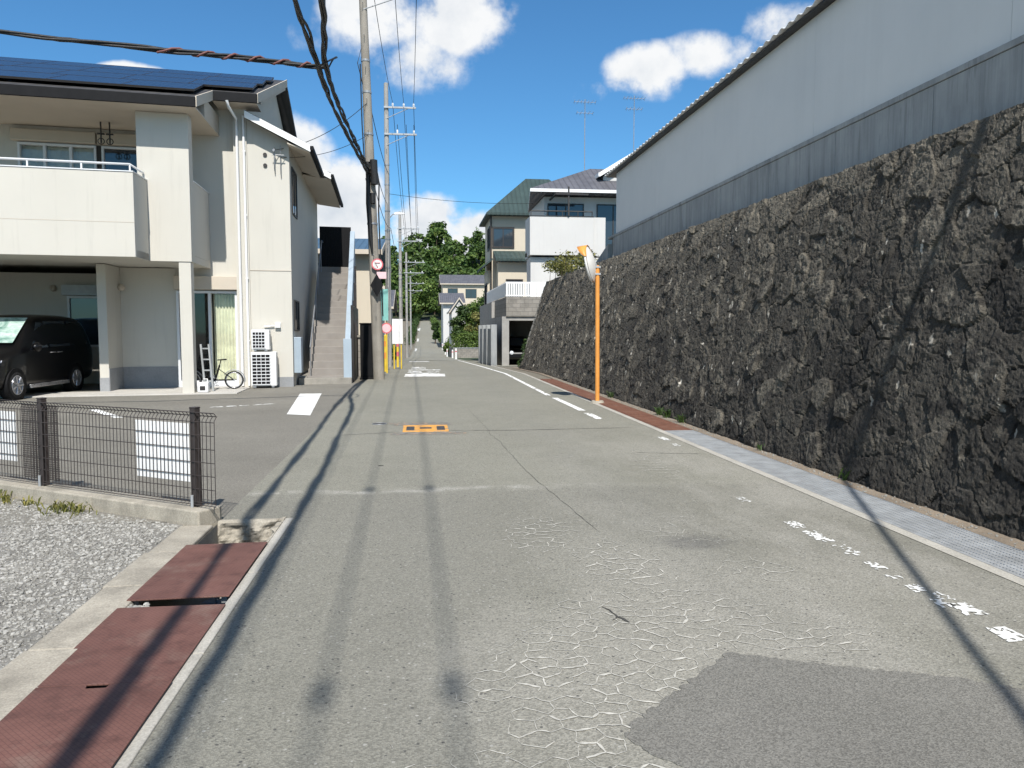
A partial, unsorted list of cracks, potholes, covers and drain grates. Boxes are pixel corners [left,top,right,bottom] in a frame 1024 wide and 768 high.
drain grate [688,439,749,452]
crack [392,587,883,768]
drain grate [853,506,987,540]
manhole cover [389,422,467,435]
drain grate [931,538,1024,579]
drain grate [664,430,718,440]
crack [473,414,597,552]
drain grate [751,465,836,484]
drain grate [795,483,899,508]
drain grate [717,451,787,466]
crack [563,536,678,585]
